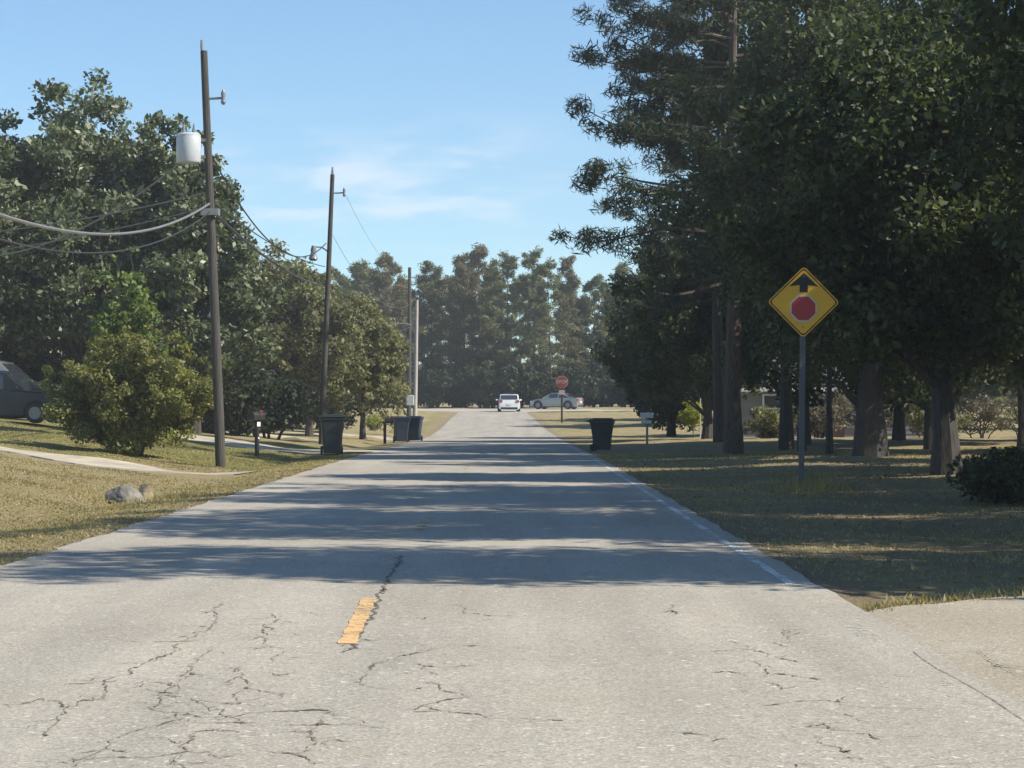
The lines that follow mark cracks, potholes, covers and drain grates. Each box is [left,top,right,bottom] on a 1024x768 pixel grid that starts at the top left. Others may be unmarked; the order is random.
crack [712,628,939,768]
crack [6,604,385,768]
crack [359,647,555,723]
